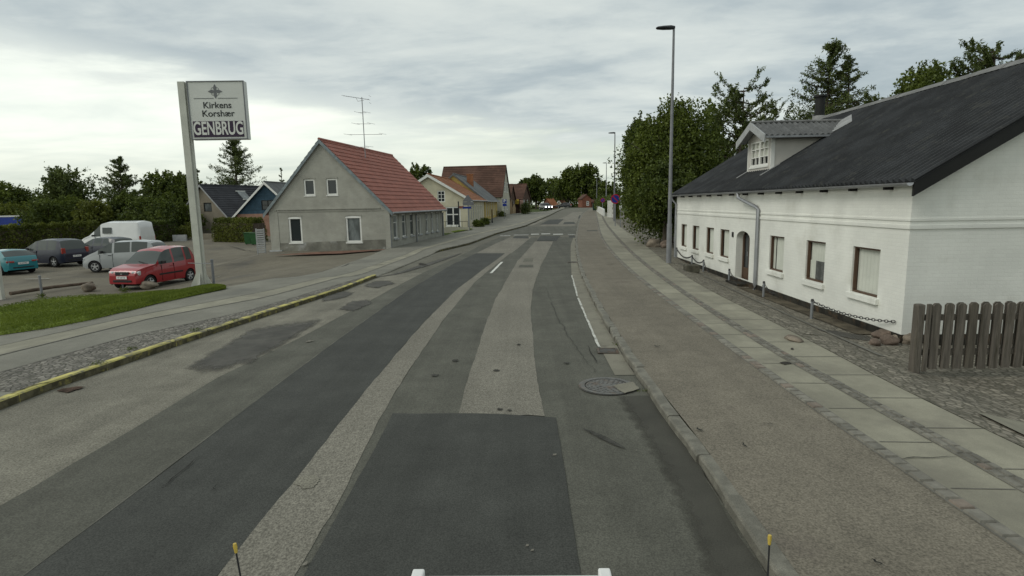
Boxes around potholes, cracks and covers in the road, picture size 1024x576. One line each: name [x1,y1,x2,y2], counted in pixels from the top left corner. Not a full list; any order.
manhole cover [579,377,632,395]
crack [545,287,597,371]
